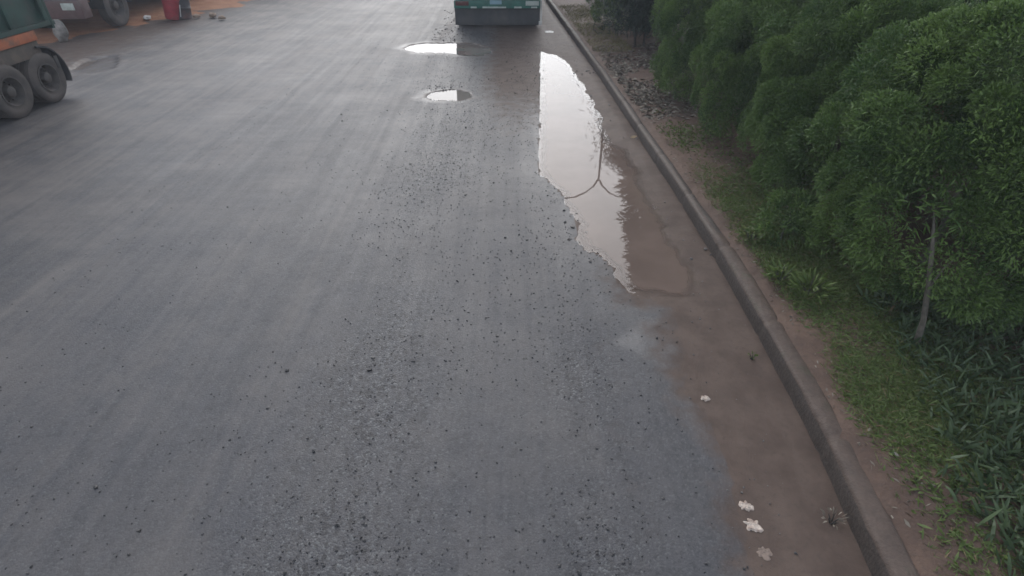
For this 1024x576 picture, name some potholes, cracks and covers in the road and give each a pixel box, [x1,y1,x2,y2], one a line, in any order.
pothole [400,42,493,57]
pothole [422,89,474,101]
